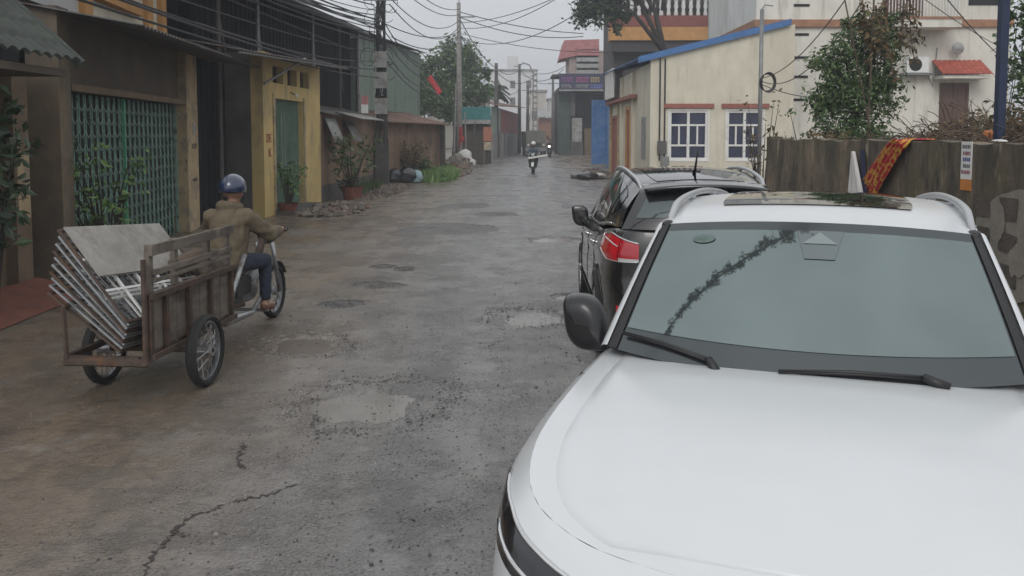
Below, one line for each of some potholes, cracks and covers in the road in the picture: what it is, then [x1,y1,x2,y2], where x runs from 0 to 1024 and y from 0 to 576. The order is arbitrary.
crack [142,483,301,576]
crack [236,442,247,469]
pothole [390,222,501,236]
pothole [315,299,366,310]
pothole [475,303,565,334]
